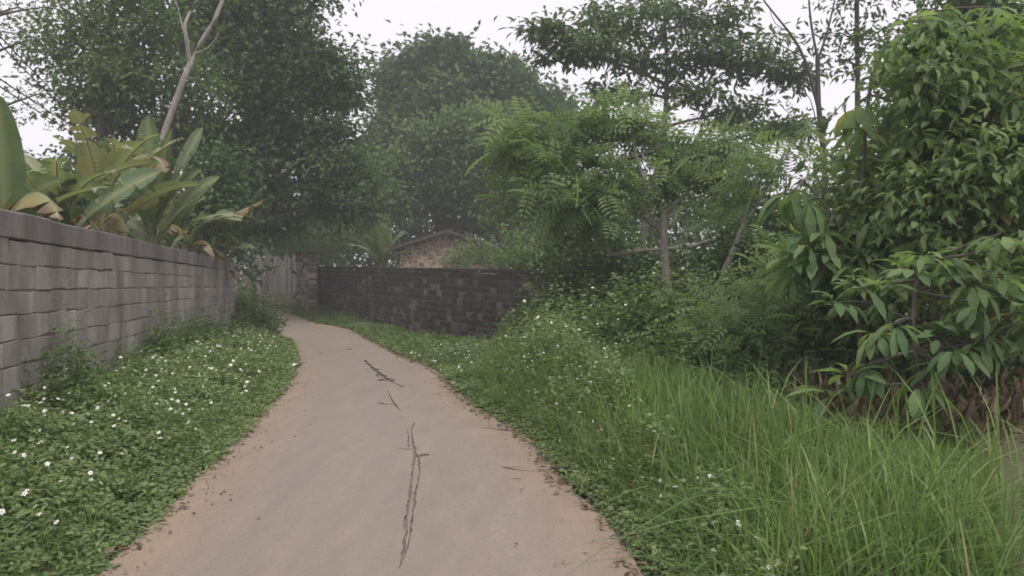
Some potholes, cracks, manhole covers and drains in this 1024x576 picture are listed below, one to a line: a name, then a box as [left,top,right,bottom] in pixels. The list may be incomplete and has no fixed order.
crack [364,360,429,568]
